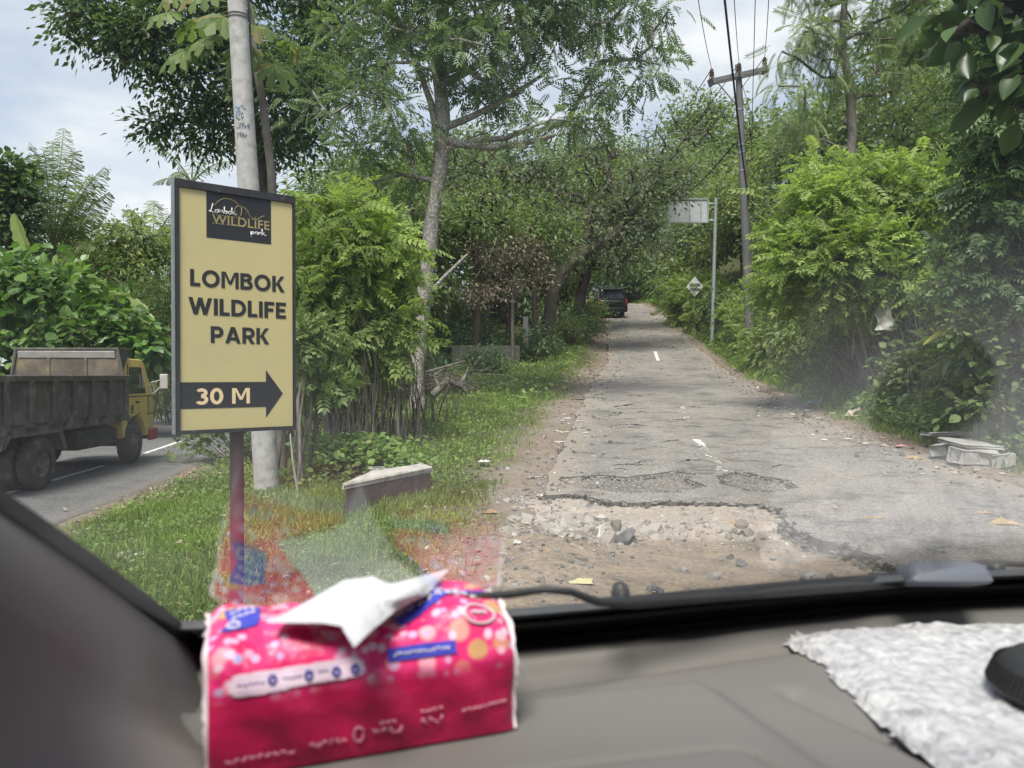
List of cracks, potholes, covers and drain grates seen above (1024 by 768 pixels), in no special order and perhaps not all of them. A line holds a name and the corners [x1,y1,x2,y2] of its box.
pothole [499,493,904,609]
pothole [716,471,801,492]
crack [611,460,655,470]
pothole [559,470,707,493]
crack [571,395,796,468]
